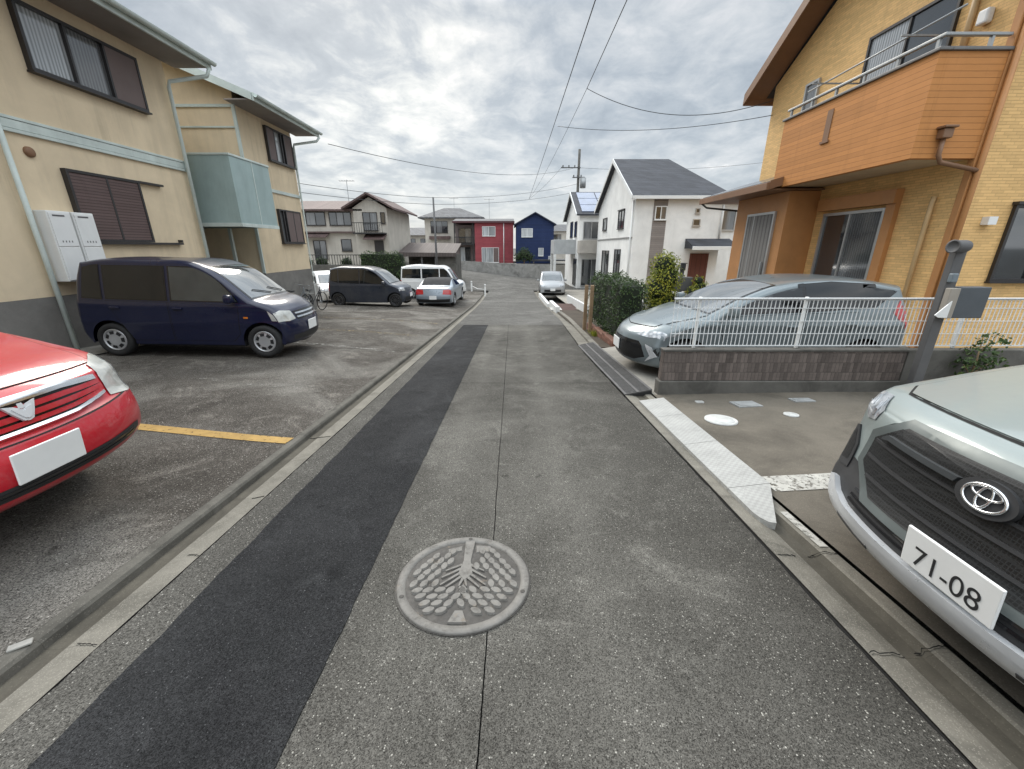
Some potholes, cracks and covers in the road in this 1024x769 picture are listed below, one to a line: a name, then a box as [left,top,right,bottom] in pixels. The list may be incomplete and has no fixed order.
manhole cover [395,537,530,636]
